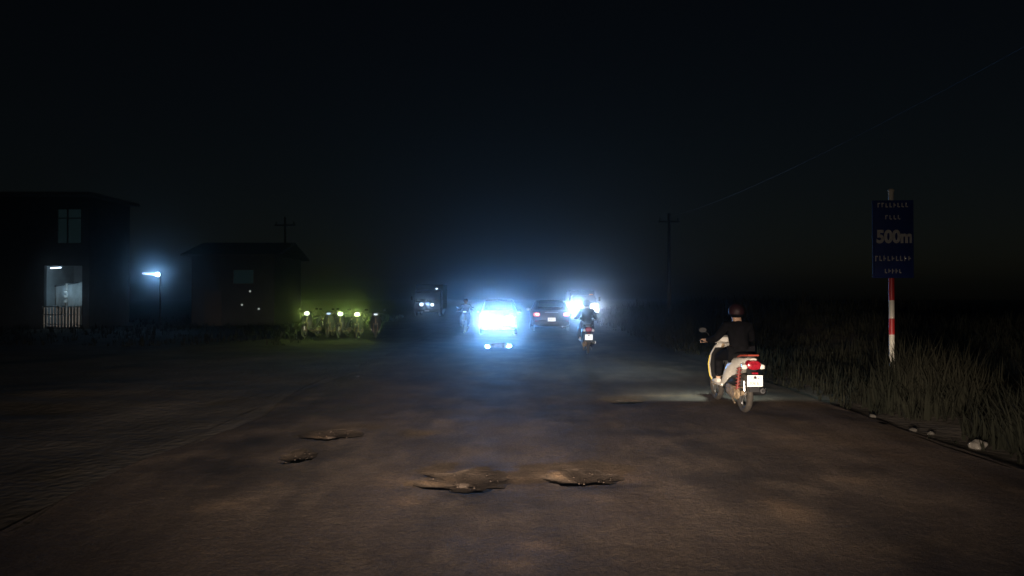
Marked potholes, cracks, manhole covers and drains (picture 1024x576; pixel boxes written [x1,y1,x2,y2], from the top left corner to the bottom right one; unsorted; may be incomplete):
pothole [277,449,318,464]
pothole [413,469,511,494]
pothole [297,429,364,441]
pothole [542,469,625,487]
